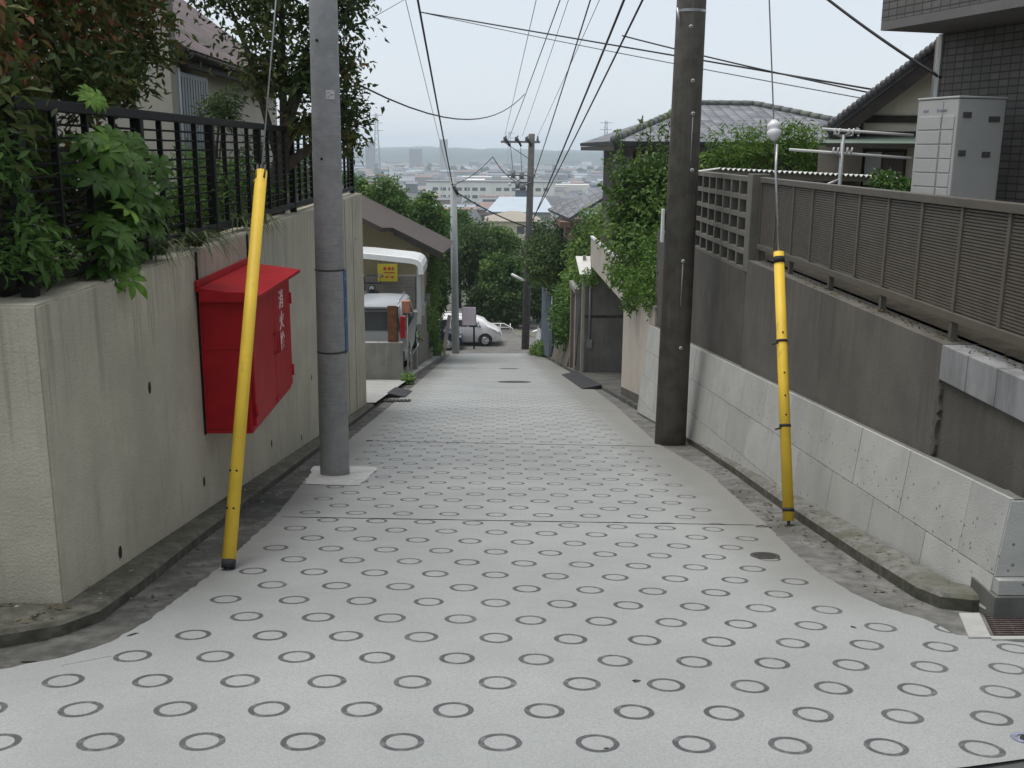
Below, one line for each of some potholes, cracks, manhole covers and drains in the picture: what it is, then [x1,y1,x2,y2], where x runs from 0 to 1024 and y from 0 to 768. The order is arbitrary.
drain grate [959,613,1024,642]
